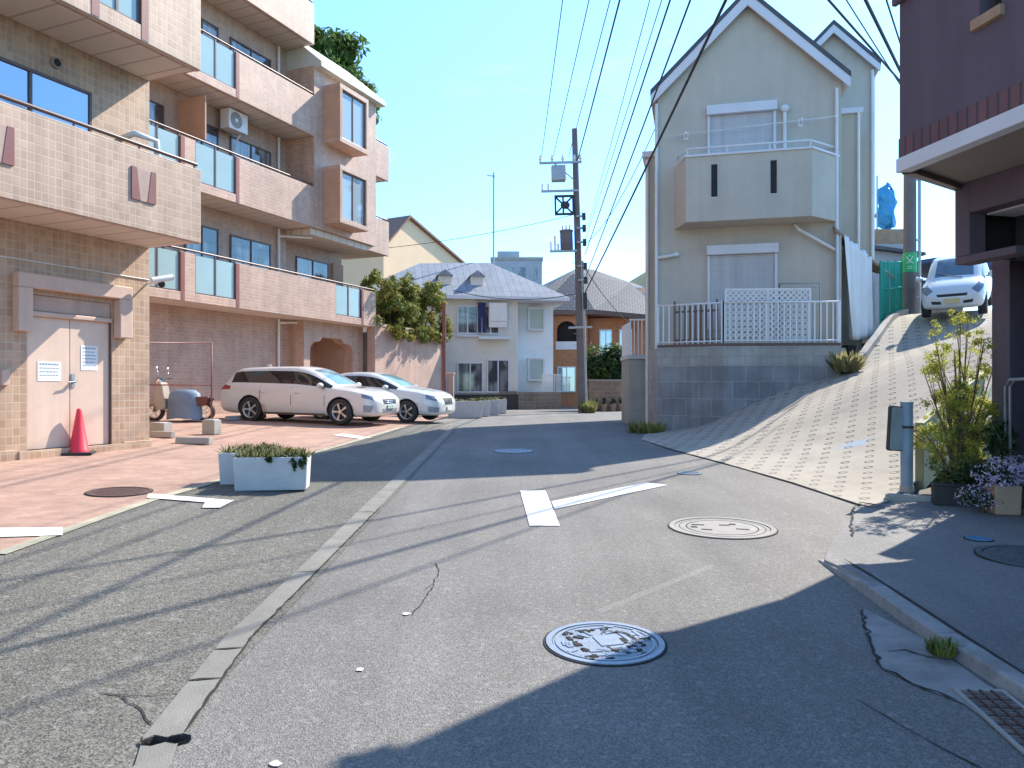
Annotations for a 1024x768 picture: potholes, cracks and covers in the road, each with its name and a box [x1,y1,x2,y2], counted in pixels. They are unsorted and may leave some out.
manhole cover [668,517,779,540]
manhole cover [84,486,154,497]
drain grate [951,687,1024,755]
crack [101,692,170,725]
manhole cover [543,621,668,667]
pothole [139,733,191,746]
crack [412,563,439,615]
manhole cover [973,545,1024,568]
crack [849,504,857,536]
